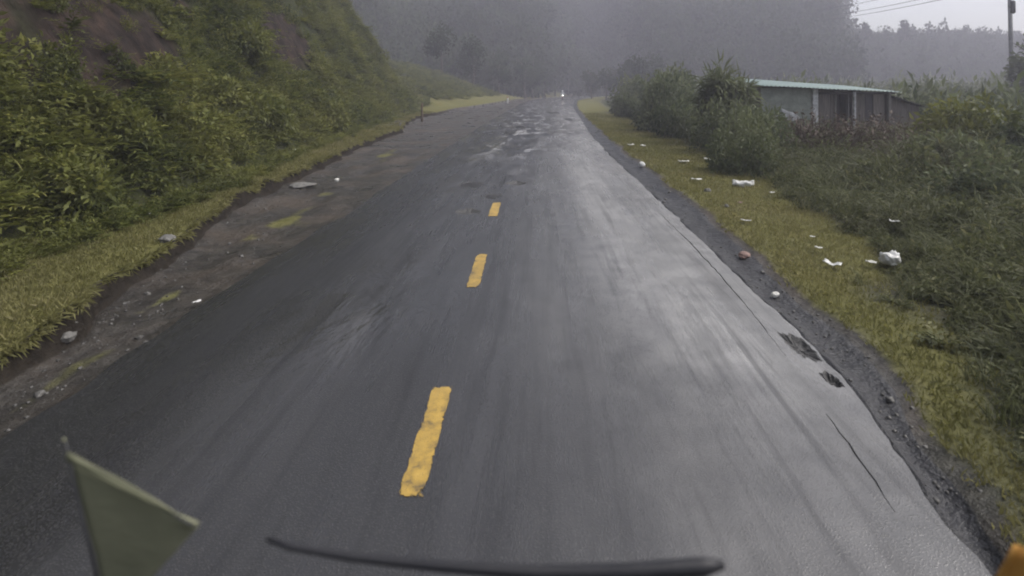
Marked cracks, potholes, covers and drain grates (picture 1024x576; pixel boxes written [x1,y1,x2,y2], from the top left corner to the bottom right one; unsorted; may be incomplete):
pothole [777,332,822,362]
pothole [819,371,845,388]
crack [826,414,895,512]
